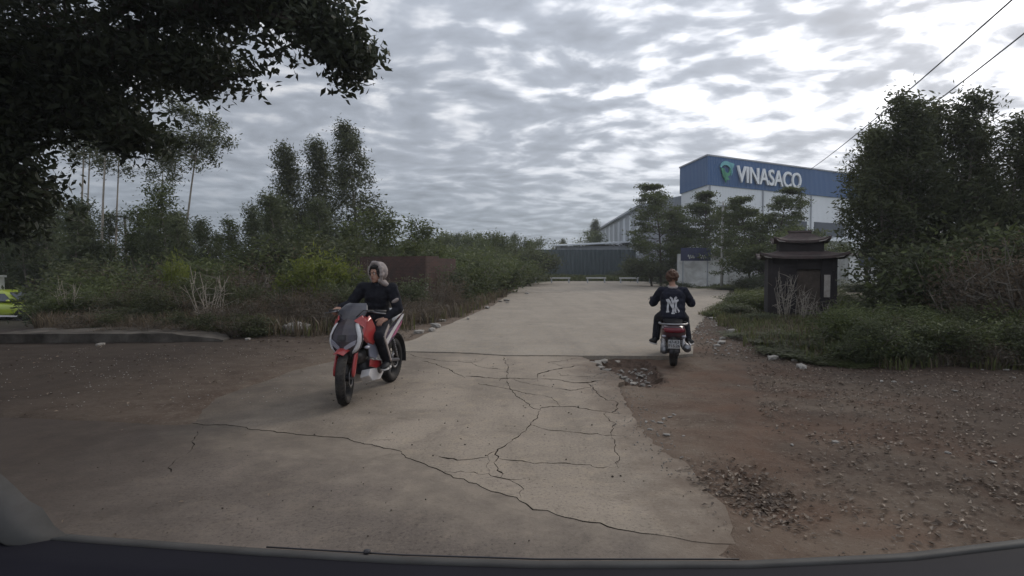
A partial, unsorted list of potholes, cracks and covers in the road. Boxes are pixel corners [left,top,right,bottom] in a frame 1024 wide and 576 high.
crack [413,355,618,431]
crack [166,414,653,535]
pothole [590,358,665,388]
